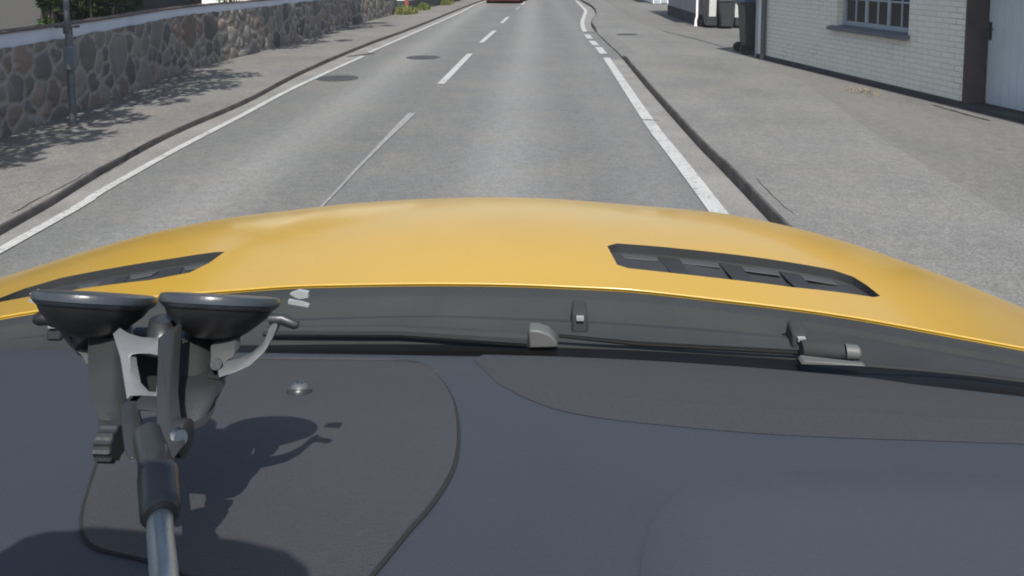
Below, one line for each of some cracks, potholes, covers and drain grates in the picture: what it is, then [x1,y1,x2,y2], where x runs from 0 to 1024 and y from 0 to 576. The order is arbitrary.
crack [934,105,991,121]
crack [13,137,157,213]
